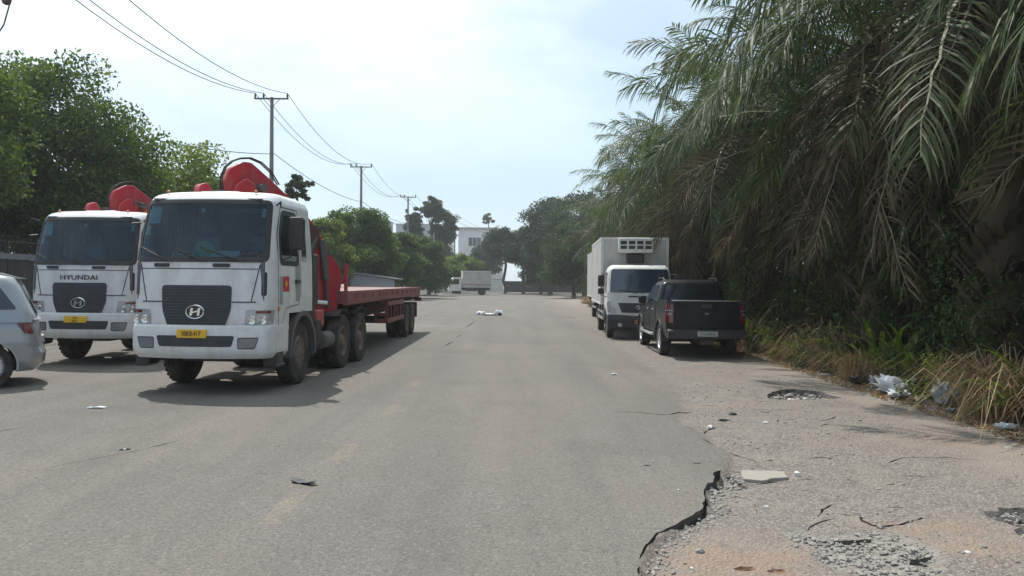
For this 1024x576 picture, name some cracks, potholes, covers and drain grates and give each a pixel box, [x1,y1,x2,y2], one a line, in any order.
crack [888,457,989,477]
pothole [767,389,841,400]
crack [636,412,776,574]
pothole [780,528,949,576]
crack [808,504,923,545]
pothole [983,507,1024,538]
